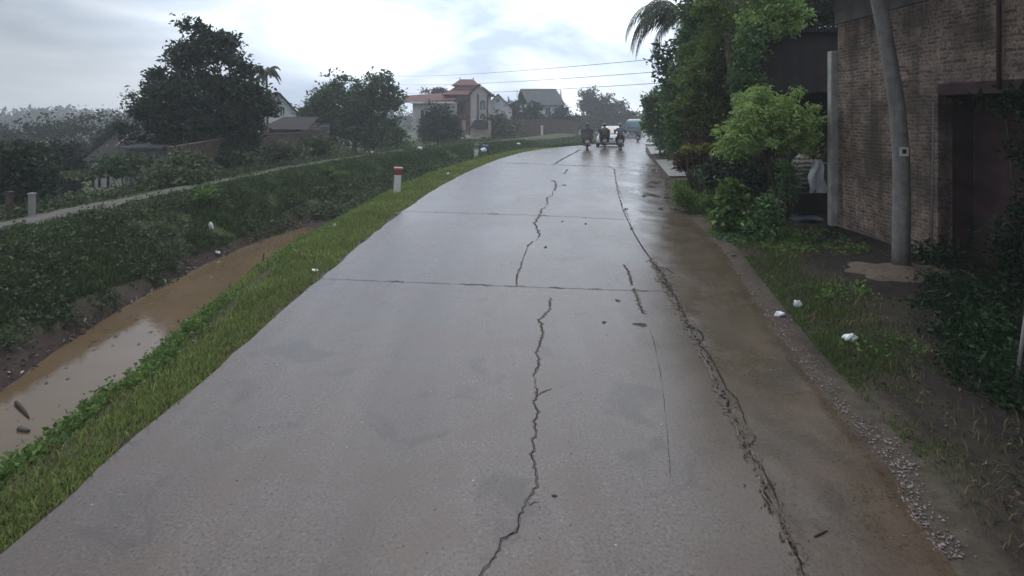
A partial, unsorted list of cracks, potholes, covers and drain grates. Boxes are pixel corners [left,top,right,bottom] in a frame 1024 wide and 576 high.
crack [515,150,580,285]
crack [622,258,813,576]
crack [479,297,552,576]
